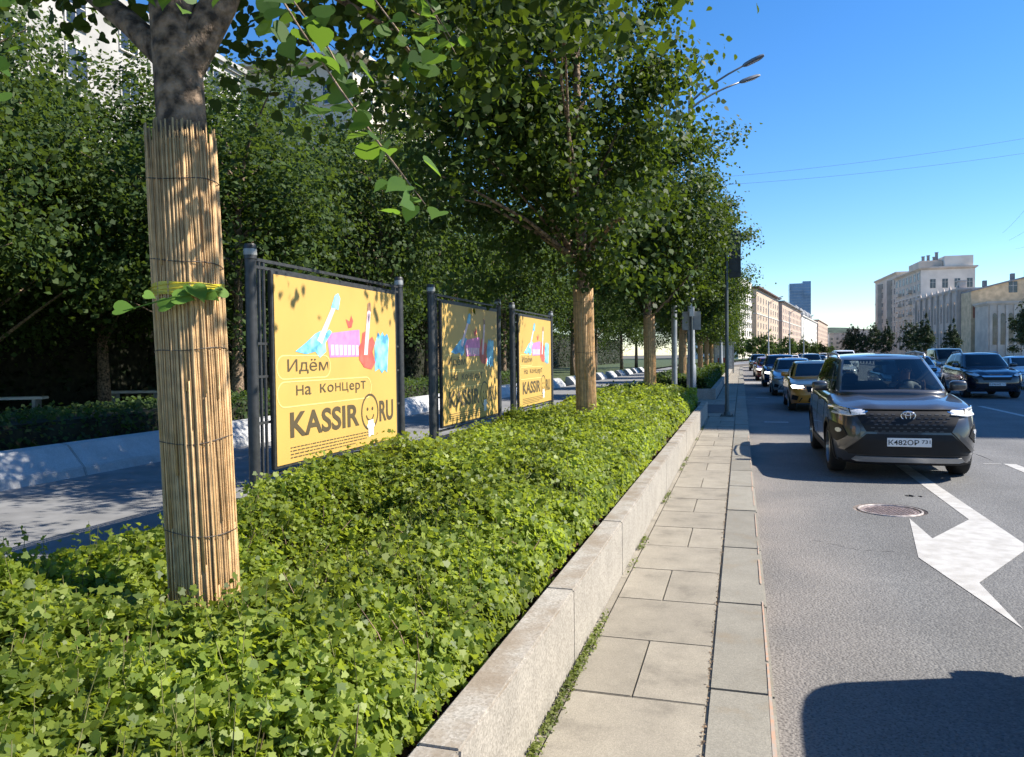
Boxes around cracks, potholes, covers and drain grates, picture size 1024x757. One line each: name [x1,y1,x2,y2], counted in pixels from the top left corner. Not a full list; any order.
manhole cover [853,503,928,517]
